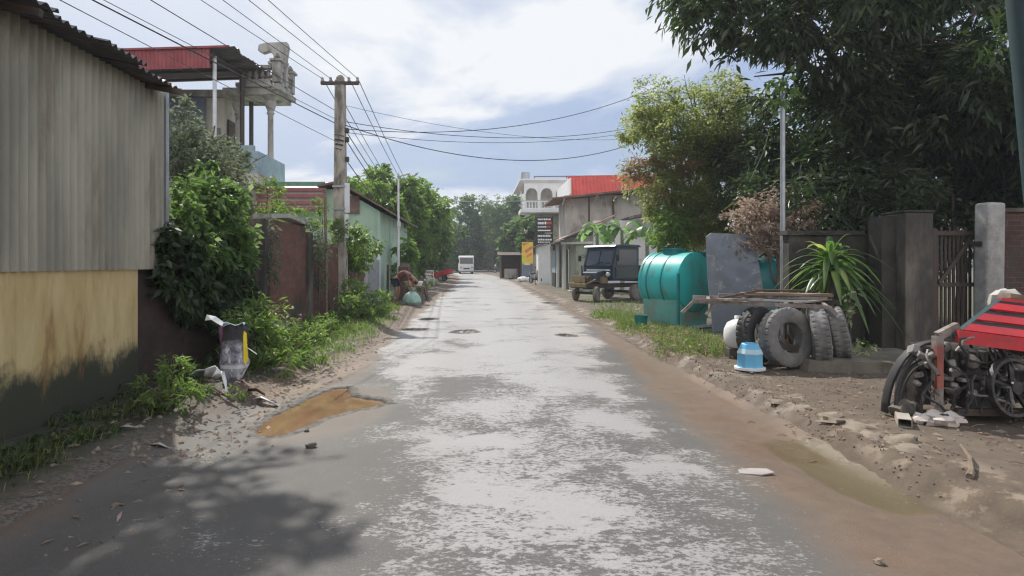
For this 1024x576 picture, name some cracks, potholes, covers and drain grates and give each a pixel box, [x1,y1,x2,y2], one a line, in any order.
pothole [246,386,398,439]
